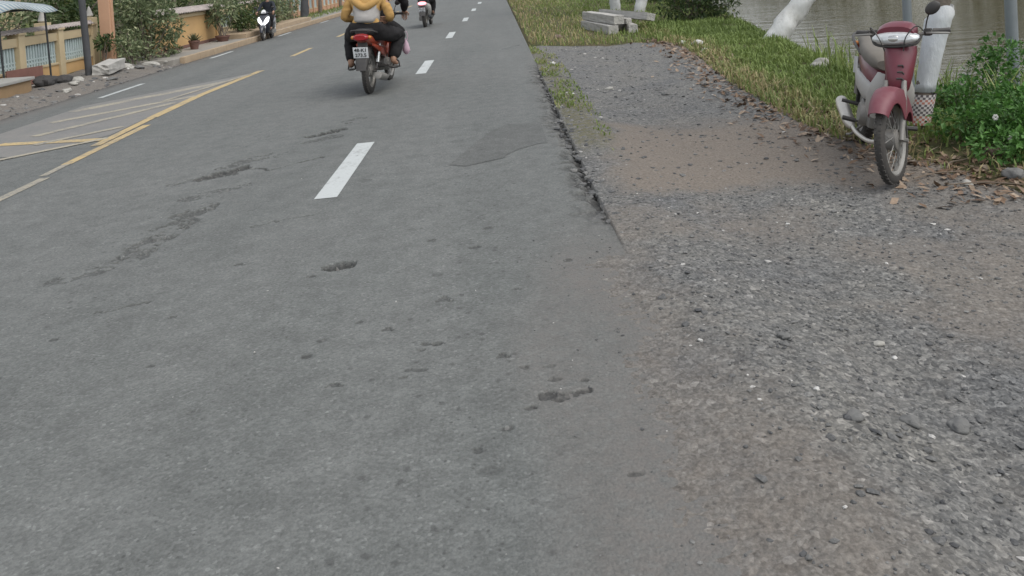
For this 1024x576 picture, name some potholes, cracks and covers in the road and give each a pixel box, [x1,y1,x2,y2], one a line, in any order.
pothole [184,163,259,184]
pothole [524,380,604,410]
pothole [296,126,353,139]
pothole [310,256,365,275]
